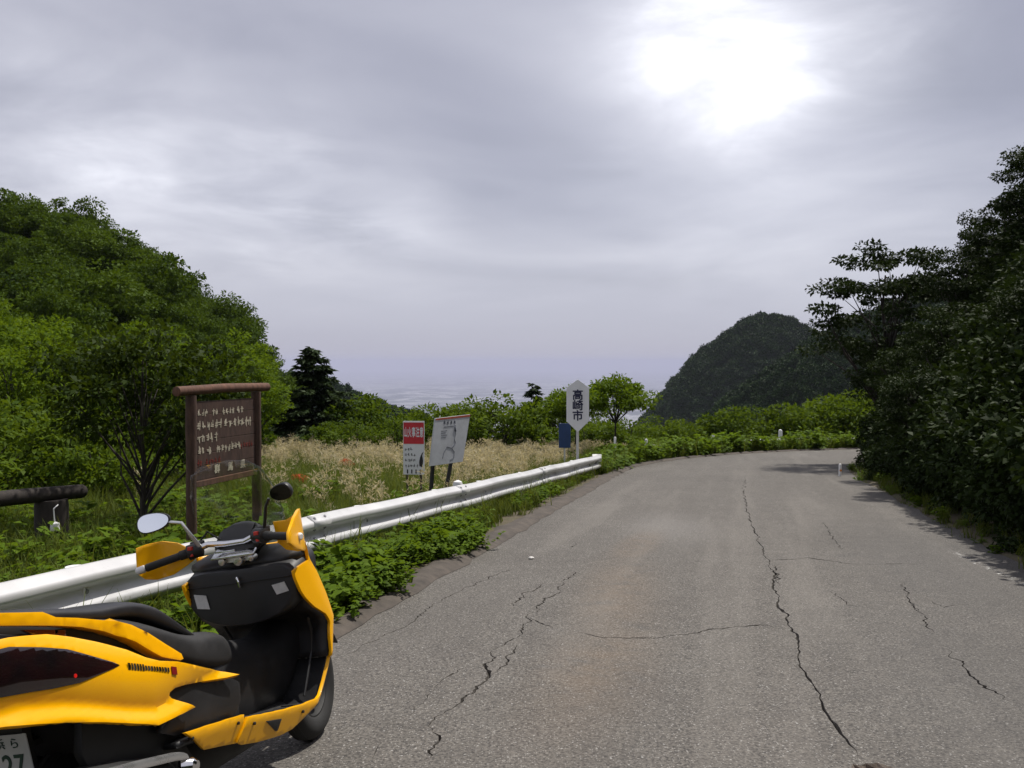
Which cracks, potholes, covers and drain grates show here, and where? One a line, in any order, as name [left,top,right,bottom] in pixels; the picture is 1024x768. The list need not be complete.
crack [368,572,576,761]
crack [948,649,1016,703]
crack [581,477,903,758]
crack [901,584,962,632]
